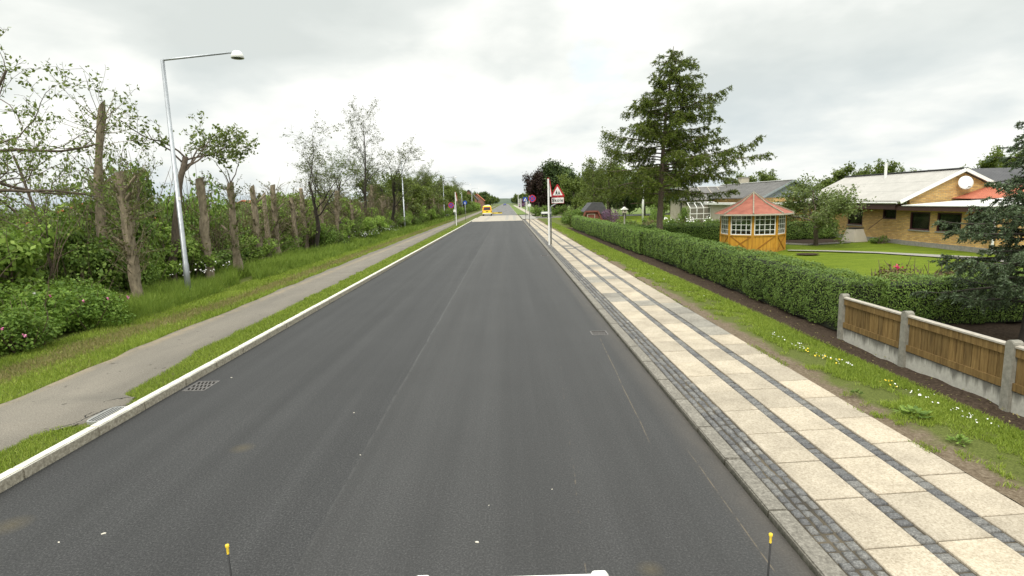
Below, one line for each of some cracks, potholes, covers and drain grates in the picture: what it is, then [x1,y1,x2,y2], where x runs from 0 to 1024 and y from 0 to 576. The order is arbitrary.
crack [53,397,135,430]
drain grate [86,406,126,425]
drain grate [182,381,220,391]
